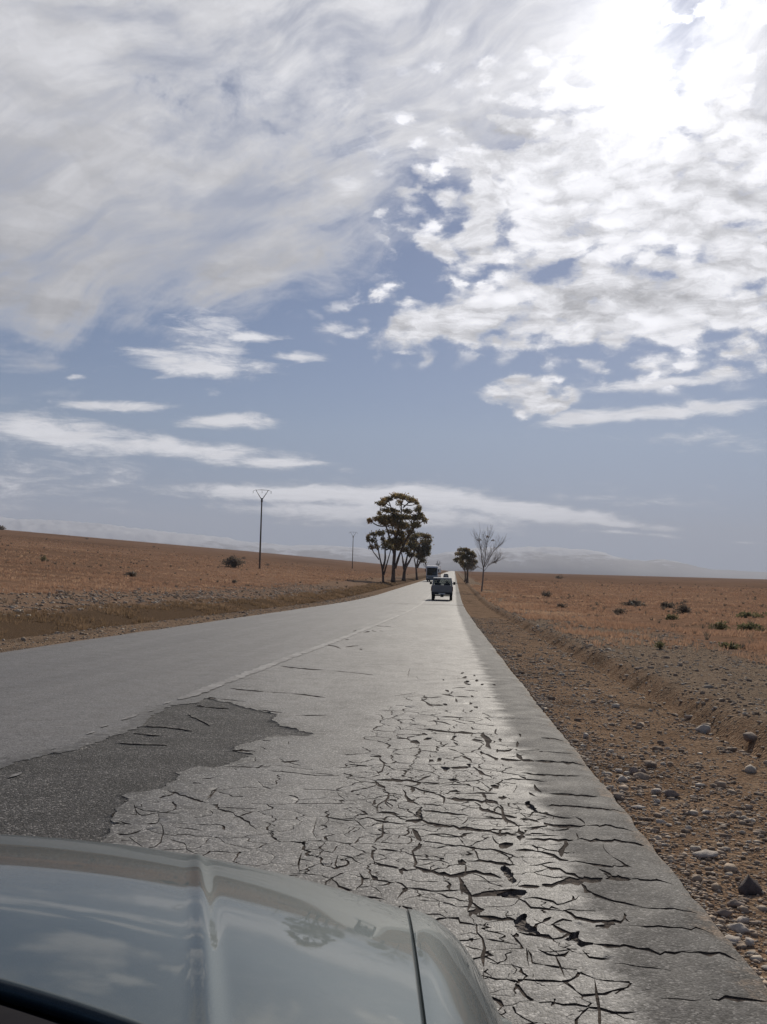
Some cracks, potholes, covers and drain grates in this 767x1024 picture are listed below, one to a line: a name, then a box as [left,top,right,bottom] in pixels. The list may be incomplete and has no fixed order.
crack [282,666,370,675]
crack [107,672,767,1024]
